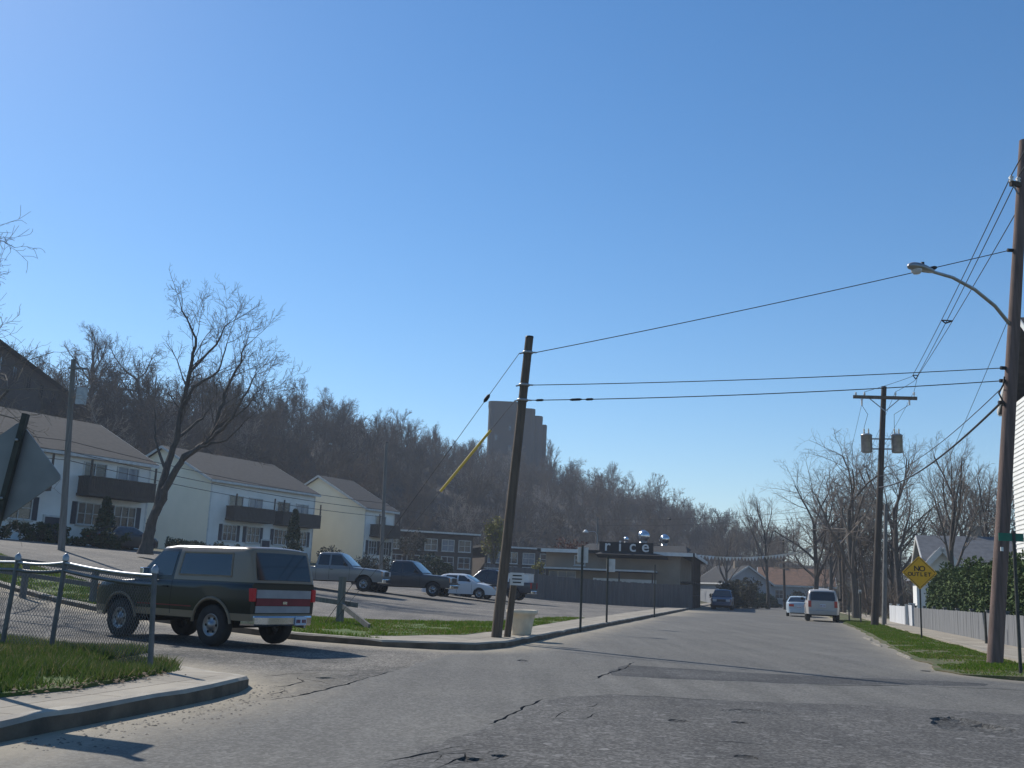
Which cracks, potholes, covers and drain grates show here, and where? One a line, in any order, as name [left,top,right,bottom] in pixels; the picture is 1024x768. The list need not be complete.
crack [380,743,505,768]
crack [270,670,358,694]
crack [542,662,724,719]
pothole [930,716,1017,735]
